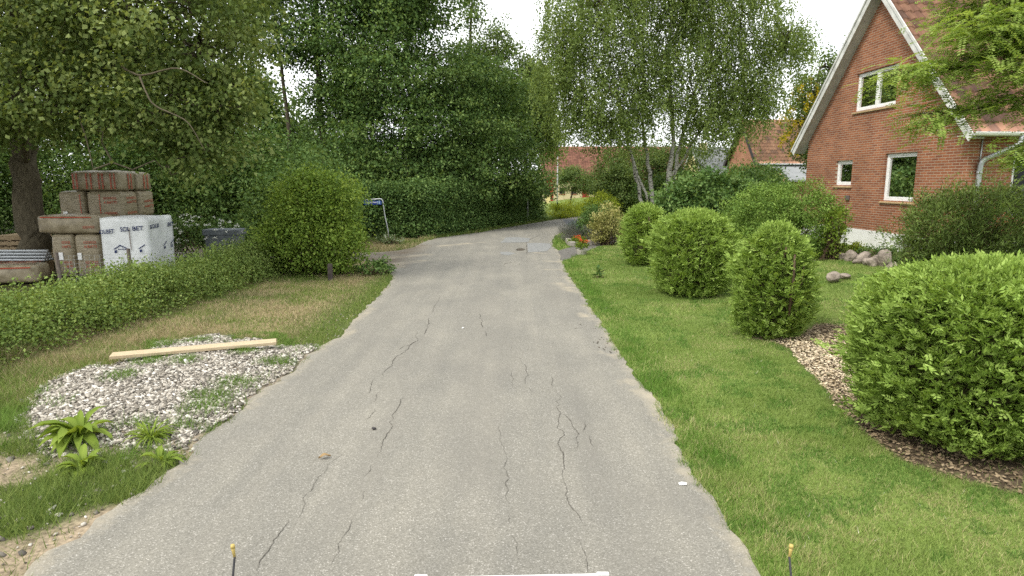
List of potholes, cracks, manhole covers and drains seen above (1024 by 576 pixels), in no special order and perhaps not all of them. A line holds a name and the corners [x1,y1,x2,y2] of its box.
crack [367,301,438,419]
crack [548,378,591,571]
crack [331,399,401,564]
